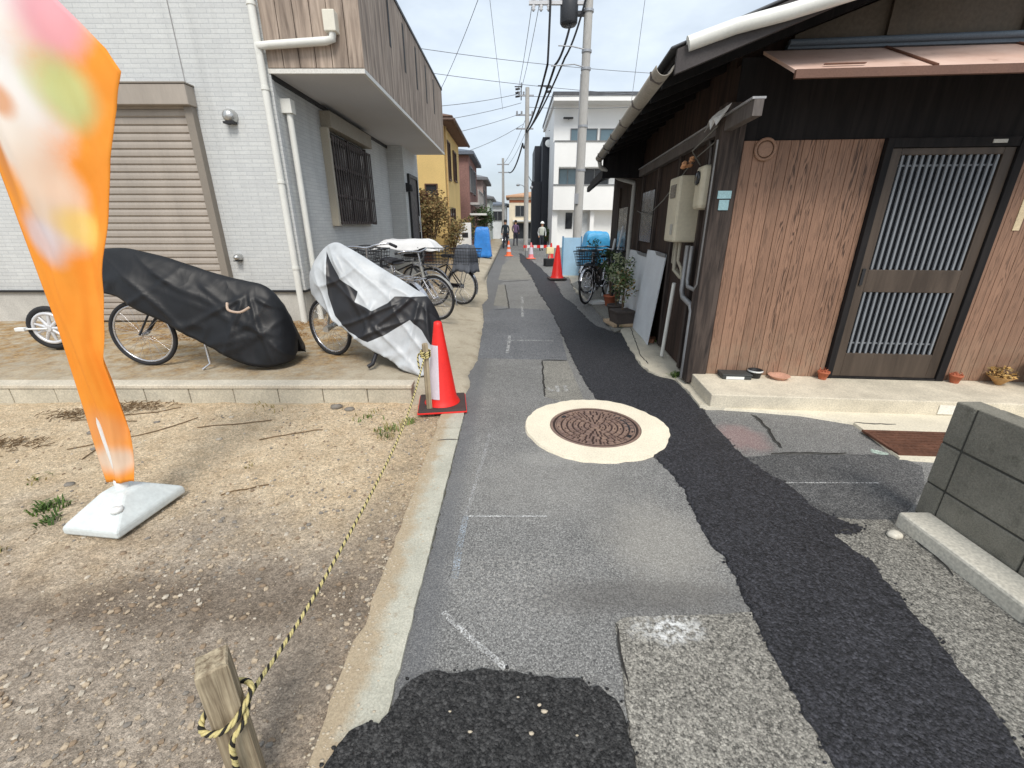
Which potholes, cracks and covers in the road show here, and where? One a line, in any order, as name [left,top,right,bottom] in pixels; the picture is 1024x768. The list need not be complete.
crack [750,414,846,455]
manhole cover [525,400,670,464]
